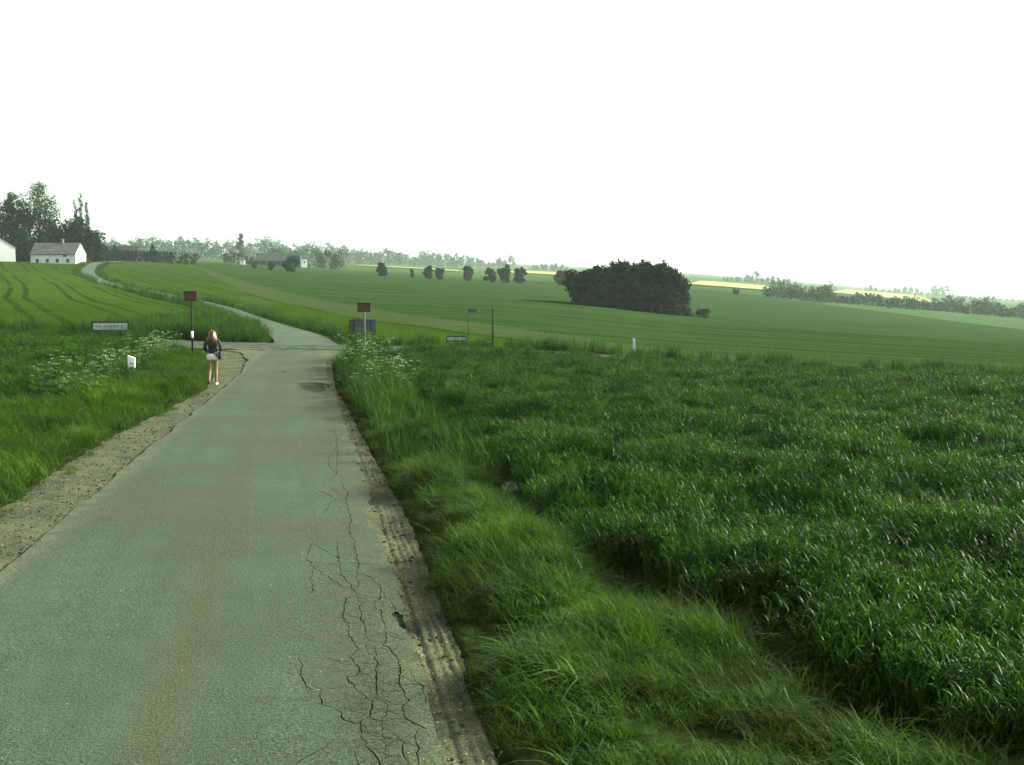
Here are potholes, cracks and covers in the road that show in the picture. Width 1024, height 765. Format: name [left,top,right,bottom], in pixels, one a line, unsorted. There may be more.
pothole [298,383,330,393]
pothole [392,612,406,629]
crack [298,493,427,765]
